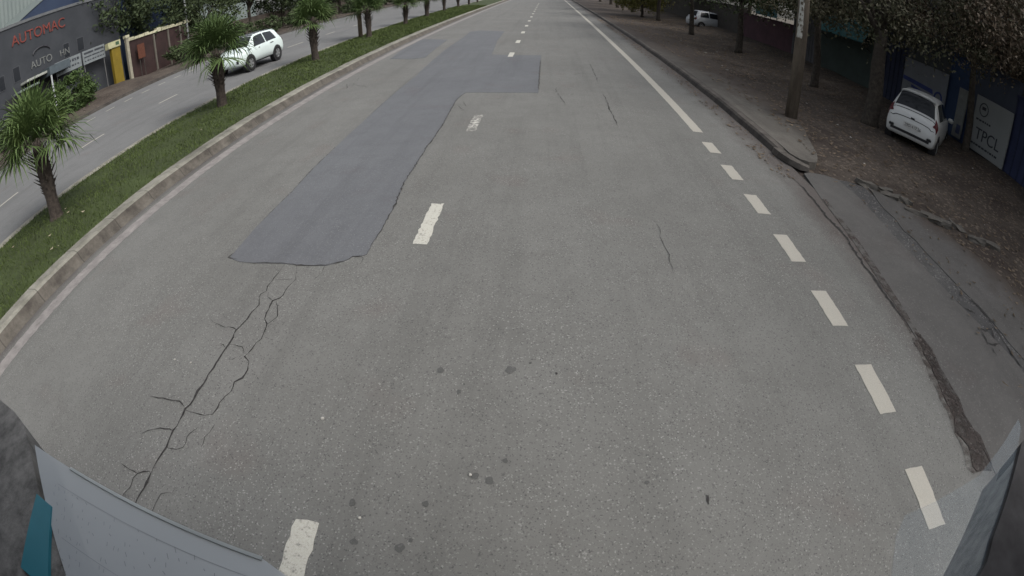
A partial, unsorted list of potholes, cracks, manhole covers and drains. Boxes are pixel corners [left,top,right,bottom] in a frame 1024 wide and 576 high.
crack [121,256,363,511]
